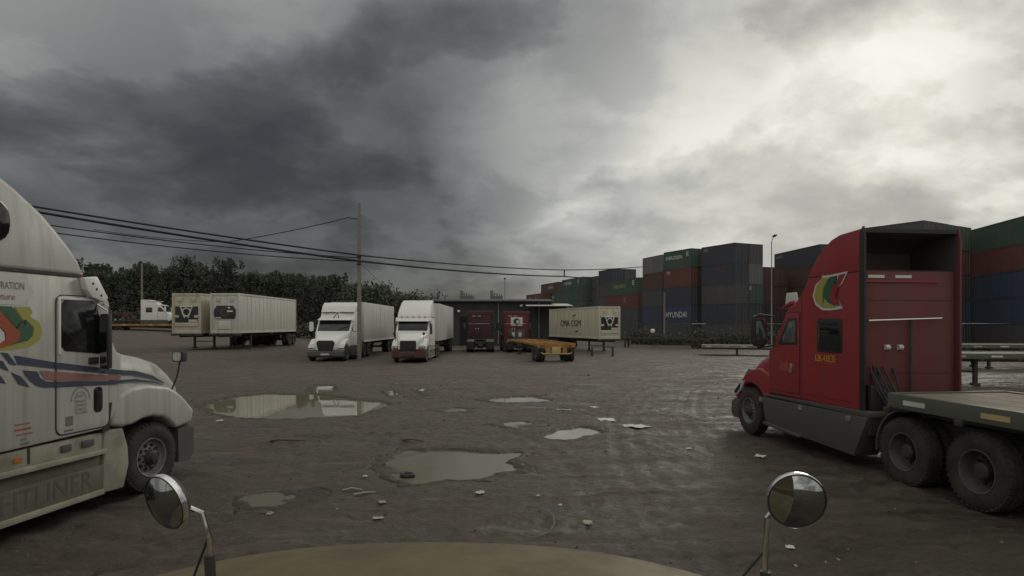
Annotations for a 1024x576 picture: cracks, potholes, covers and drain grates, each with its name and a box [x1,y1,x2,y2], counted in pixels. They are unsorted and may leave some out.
pothole [367,446,536,488]
pothole [523,425,614,443]
pothole [473,395,558,404]
pothole [231,489,331,514]
pothole [482,420,548,430]
pothole [193,392,396,420]
